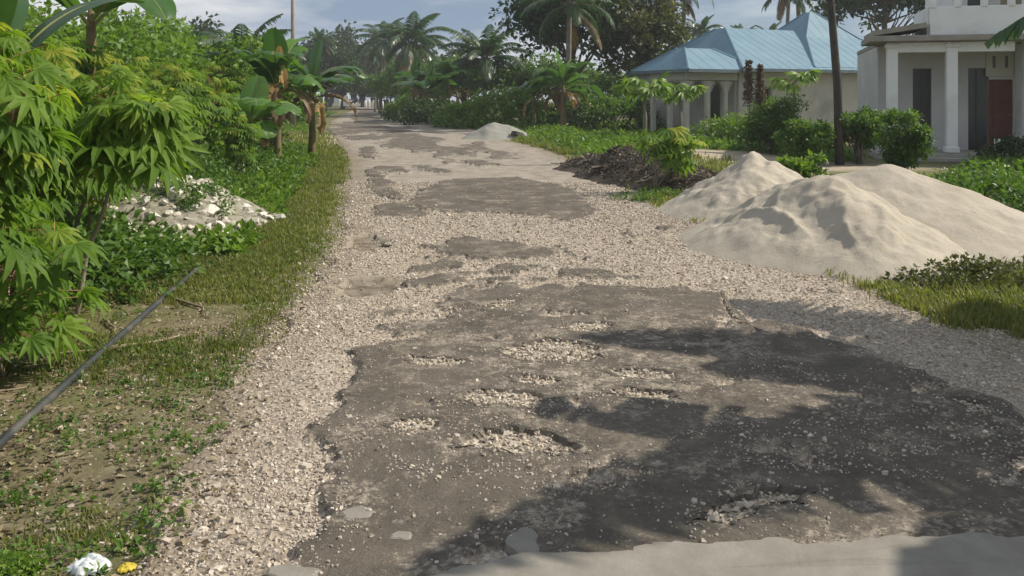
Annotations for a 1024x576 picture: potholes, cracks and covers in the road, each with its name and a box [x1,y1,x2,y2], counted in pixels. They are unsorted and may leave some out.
pothole [495,336,607,362]
pothole [506,372,566,387]
pothole [403,354,472,368]
pothole [381,415,445,435]
pothole [454,387,551,410]
pothole [601,385,686,401]
crack [721,290,759,331]
pothole [681,483,821,529]
pothole [447,423,591,456]
pothole [602,367,682,380]
pothole [551,321,617,333]
